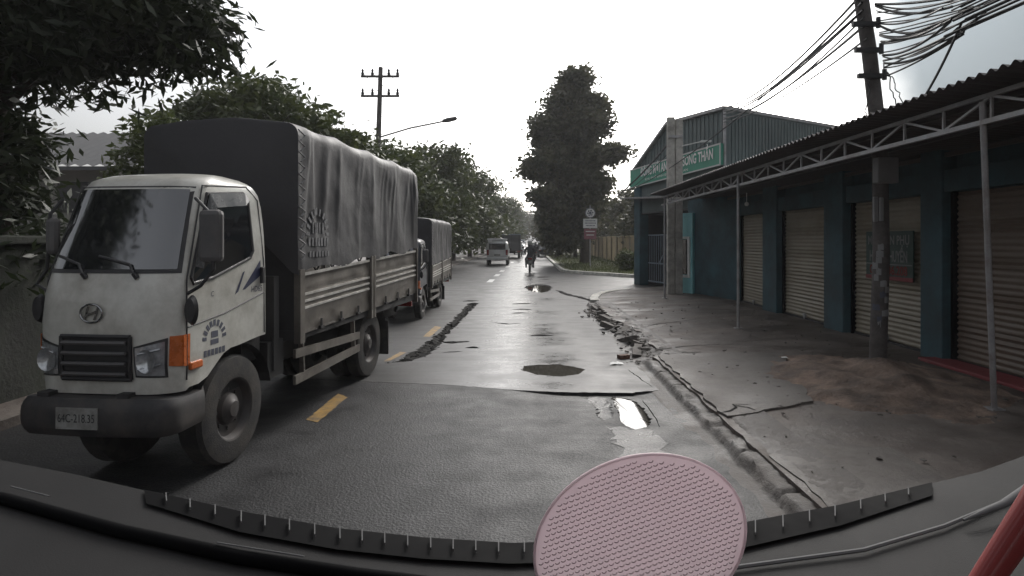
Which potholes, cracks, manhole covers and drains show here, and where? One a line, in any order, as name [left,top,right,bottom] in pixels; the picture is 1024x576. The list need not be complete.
crack [531,370,660,427]
crack [538,277,590,302]
pothole [521,364,585,376]
pothole [611,397,651,429]
pothole [524,284,552,293]
